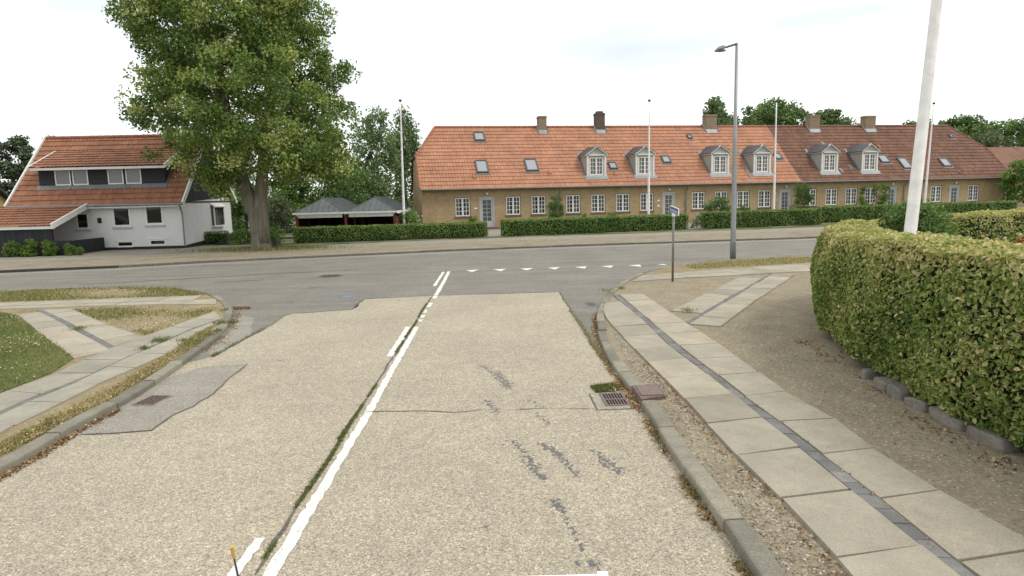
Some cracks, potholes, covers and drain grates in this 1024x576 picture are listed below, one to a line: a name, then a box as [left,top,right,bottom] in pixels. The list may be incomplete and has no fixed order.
drain grate [588,392,635,410]
drain grate [129,395,174,406]
